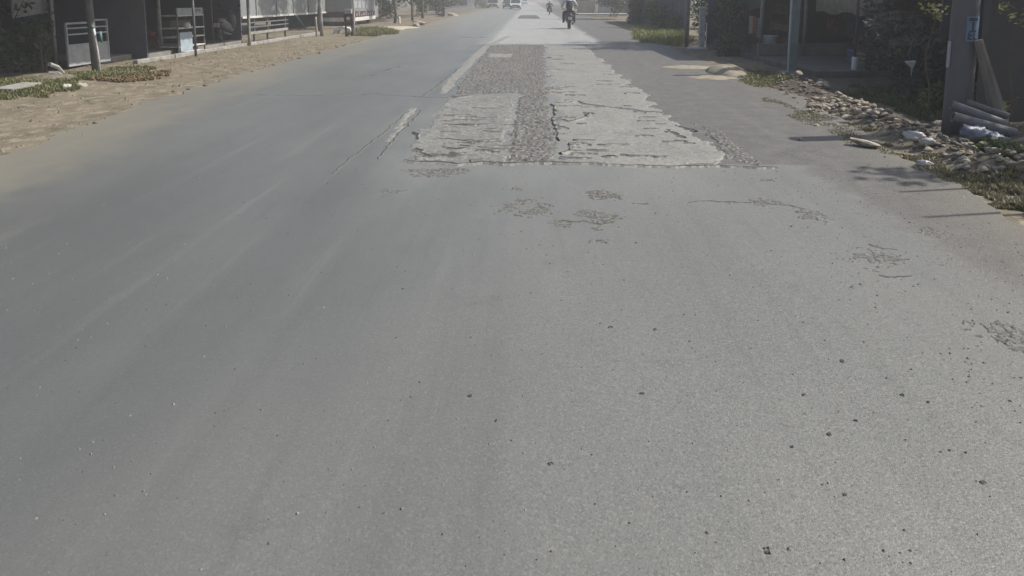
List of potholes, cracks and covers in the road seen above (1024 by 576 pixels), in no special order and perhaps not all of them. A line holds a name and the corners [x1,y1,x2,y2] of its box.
crack [257,57,778,174]
pothole [573,210,625,224]
pothole [547,219,574,228]
crack [690,200,809,210]
pothole [585,189,624,201]
pothole [404,168,469,178]
pothole [490,196,555,218]
